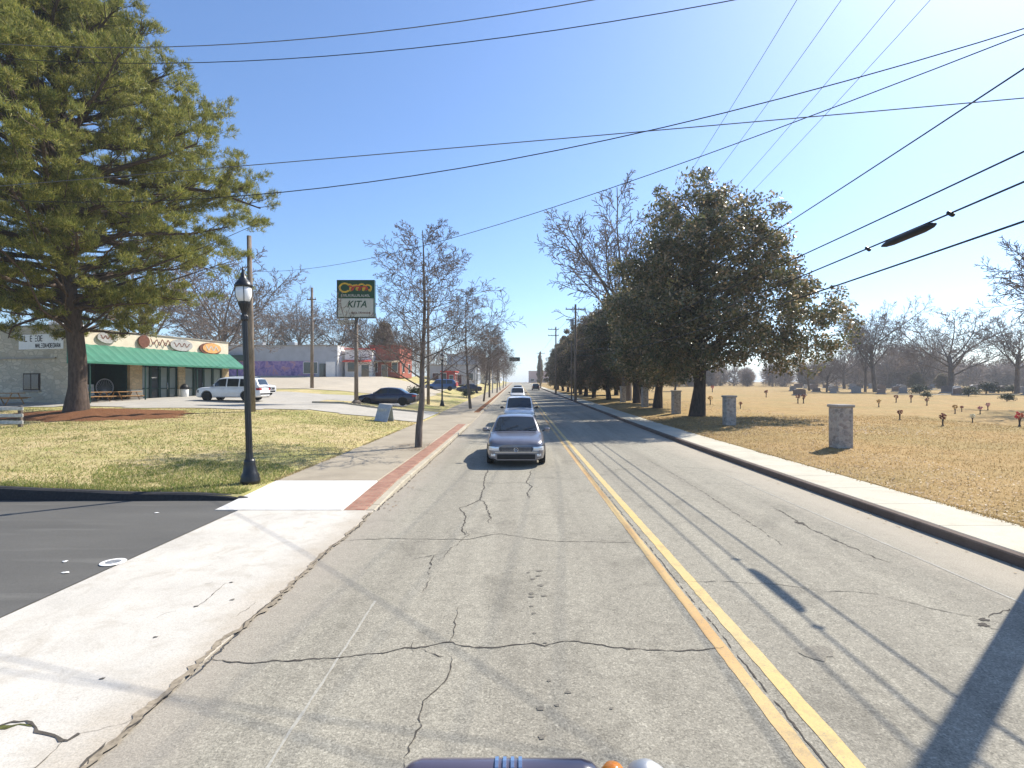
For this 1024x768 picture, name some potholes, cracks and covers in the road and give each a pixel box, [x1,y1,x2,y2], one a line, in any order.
crack [692,581,1013,633]
crack [0,429,723,768]
manhole cover [99,558,127,566]
